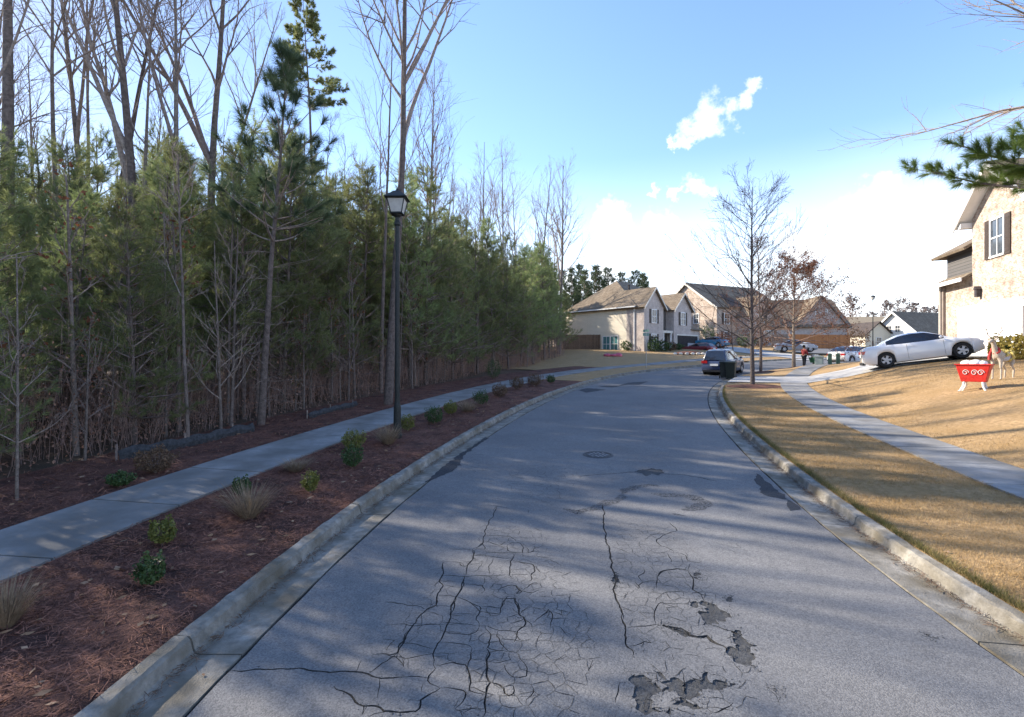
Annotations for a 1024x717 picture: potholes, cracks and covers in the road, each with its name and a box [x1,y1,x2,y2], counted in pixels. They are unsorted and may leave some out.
crack [602,505,736,692]
pothole [655,671,736,709]
pothole [690,601,731,625]
crack [226,505,562,717]
pothole [628,674,671,715]
pothole [726,630,757,666]
